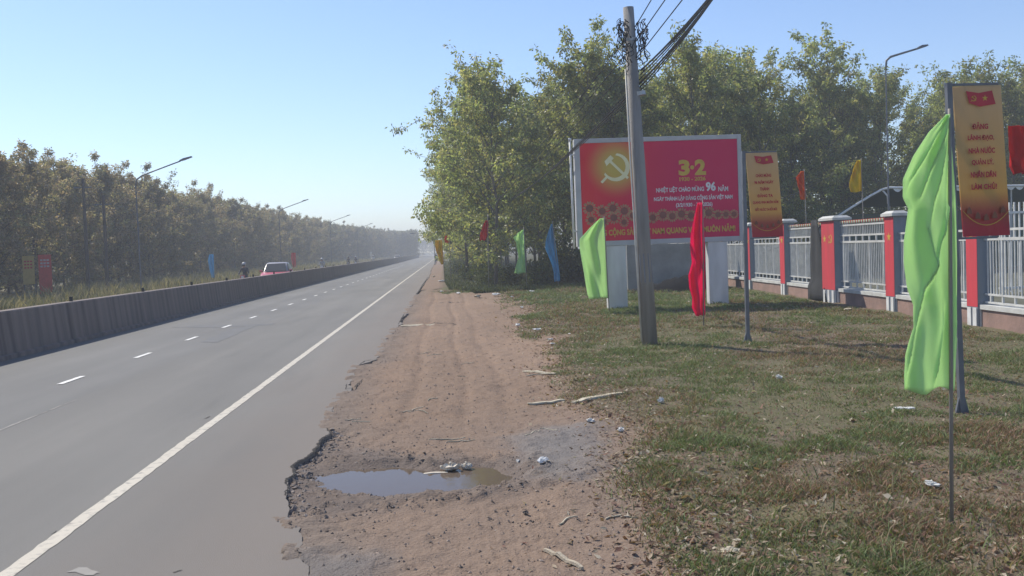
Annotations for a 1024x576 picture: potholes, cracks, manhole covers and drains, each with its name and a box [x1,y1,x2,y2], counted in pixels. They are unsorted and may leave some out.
pothole [289,441,550,519]
